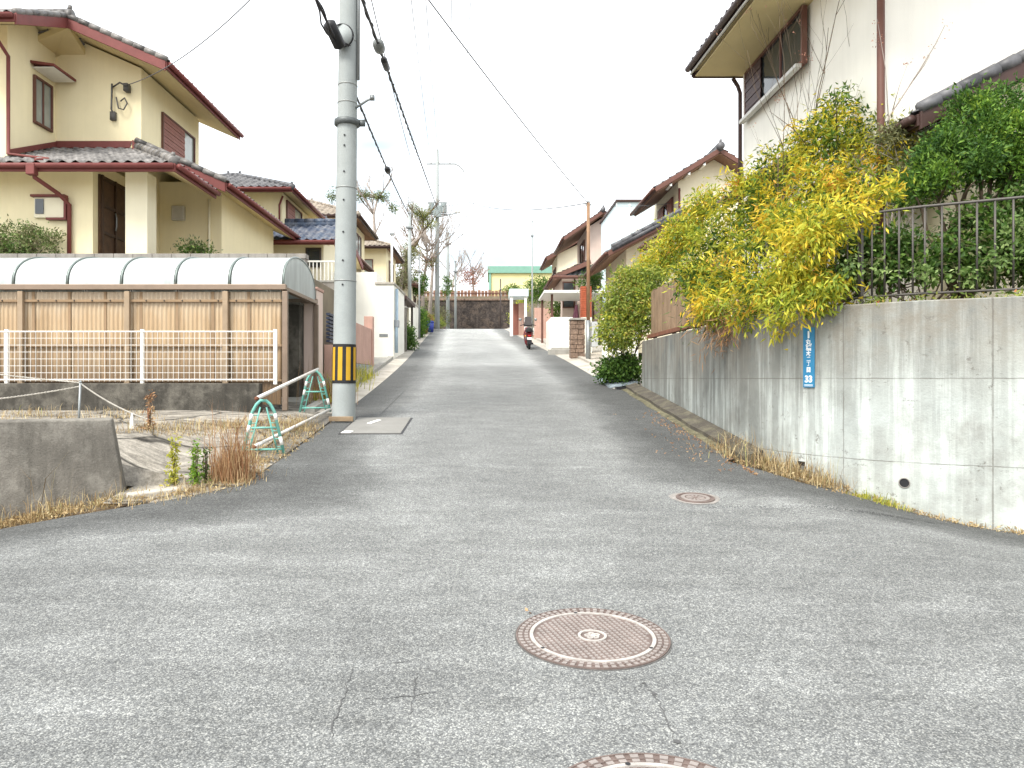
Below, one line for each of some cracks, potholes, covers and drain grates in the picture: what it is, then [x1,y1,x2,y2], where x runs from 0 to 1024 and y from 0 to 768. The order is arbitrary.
crack [642,682,681,743]
manhole cover [669,492,720,504]
manhole cover [515,608,672,671]
crack [327,660,437,745]
manhole cover [339,417,413,434]
manhole cover [568,752,717,768]
